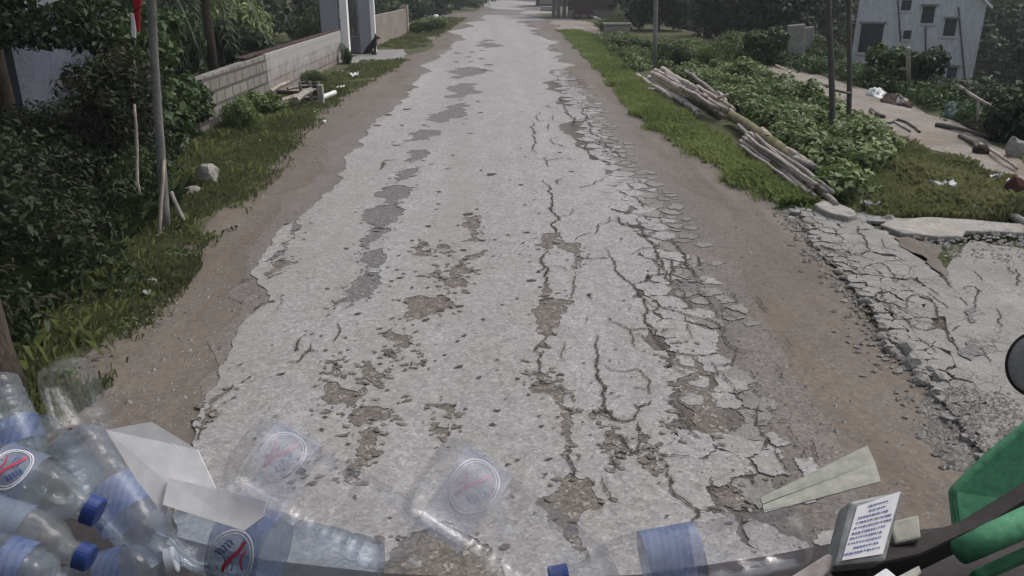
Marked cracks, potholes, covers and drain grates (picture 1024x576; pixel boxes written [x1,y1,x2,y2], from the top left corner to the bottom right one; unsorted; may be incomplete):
pothole [444,83,482,98]
pothole [338,395,412,436]
crack [812,223,984,353]
pothole [426,103,470,123]
pothole [374,182,415,207]
pothole [511,453,619,554]
pothole [356,201,405,231]
pothole [527,295,574,352]
crack [530,96,818,522]
pothole [392,292,462,325]
pothole [895,237,952,282]
